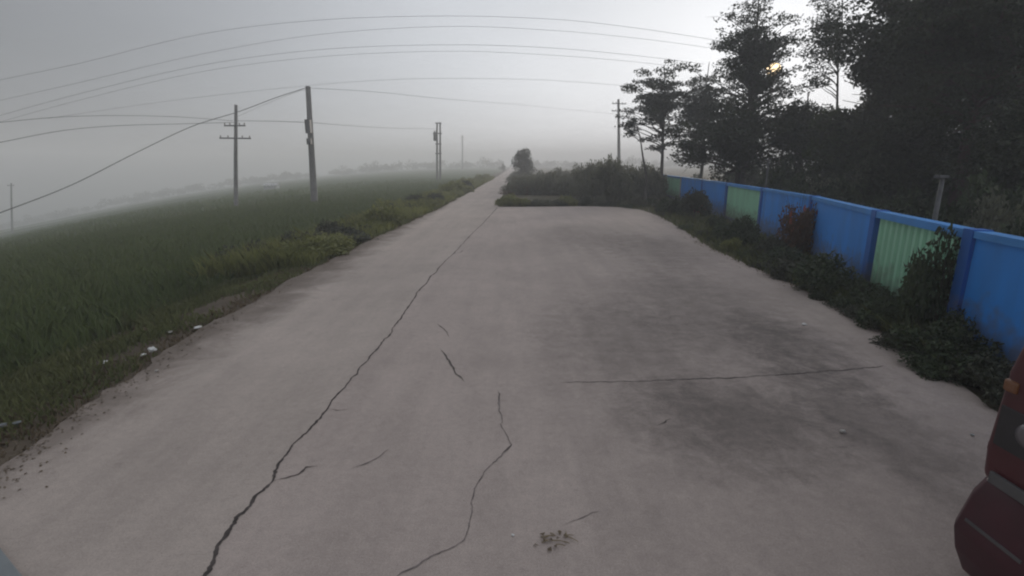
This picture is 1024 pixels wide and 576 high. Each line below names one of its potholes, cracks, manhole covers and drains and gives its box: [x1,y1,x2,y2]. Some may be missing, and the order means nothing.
crack [203,208,512,576]
